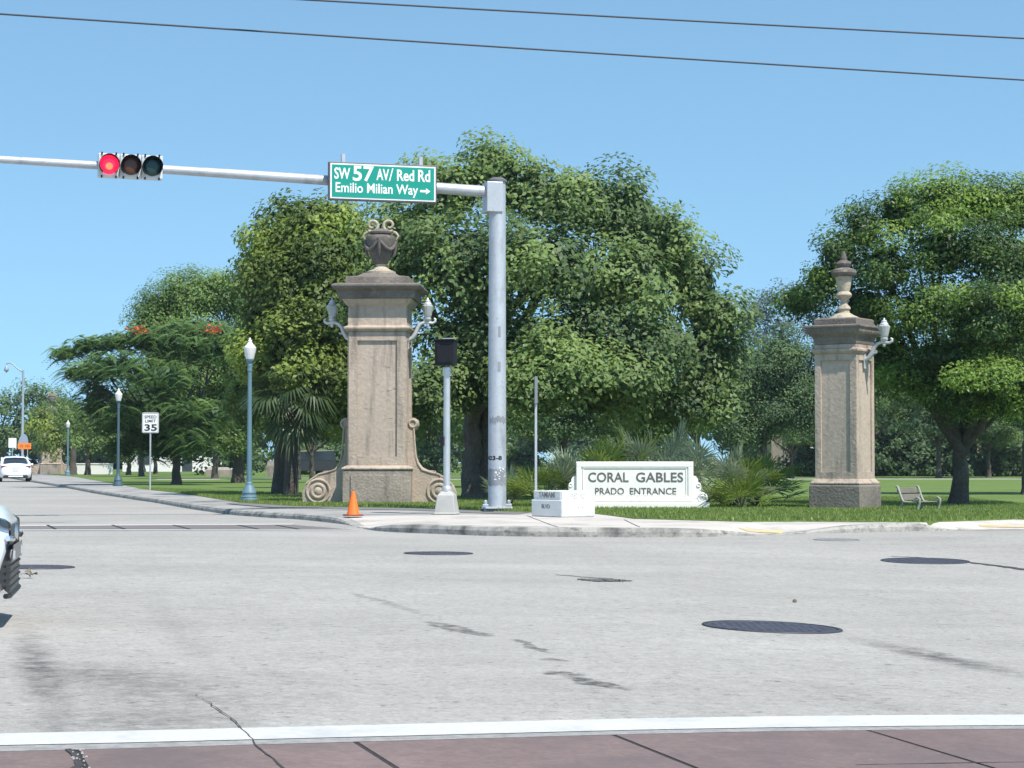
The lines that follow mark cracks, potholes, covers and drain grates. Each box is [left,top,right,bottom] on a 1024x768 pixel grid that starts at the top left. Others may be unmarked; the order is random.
crack [196,694,285,768]
crack [65,748,91,768]
manhole cover [702,620,843,634]
